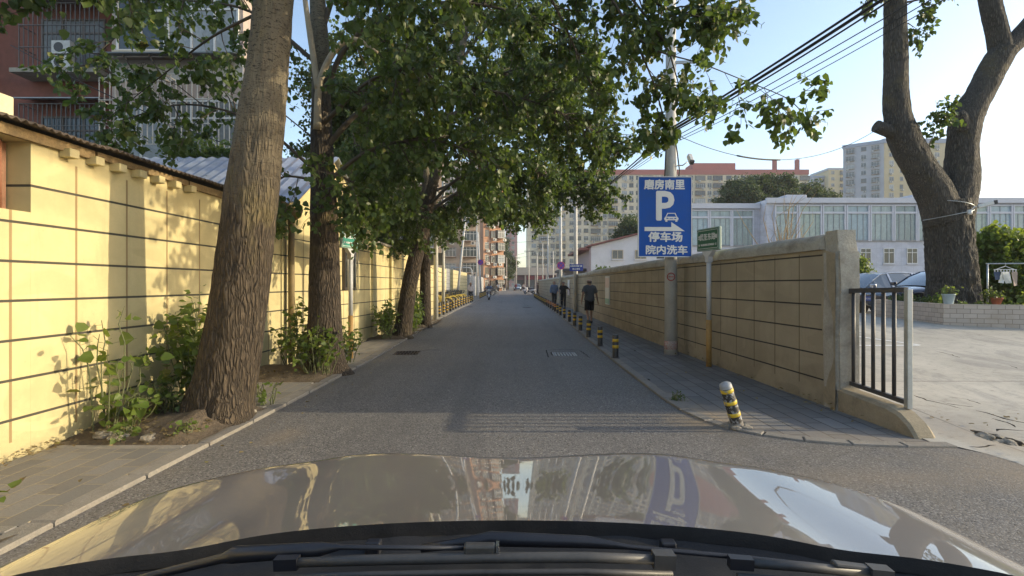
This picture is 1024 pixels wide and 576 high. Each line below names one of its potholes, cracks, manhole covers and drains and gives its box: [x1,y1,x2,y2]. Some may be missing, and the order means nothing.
crack [914,395,1024,431]
